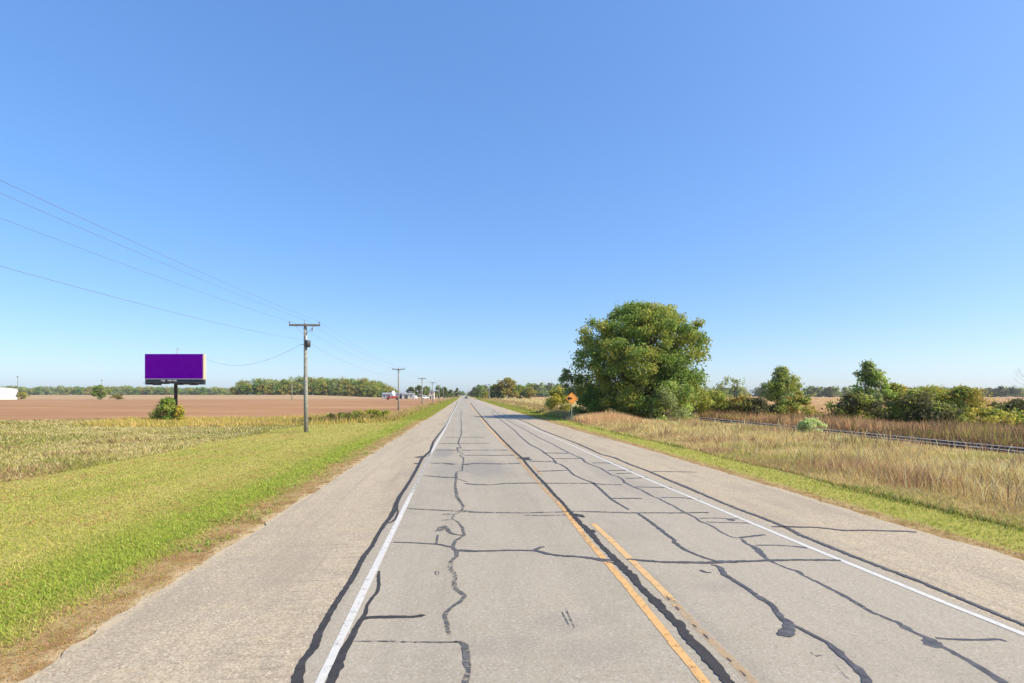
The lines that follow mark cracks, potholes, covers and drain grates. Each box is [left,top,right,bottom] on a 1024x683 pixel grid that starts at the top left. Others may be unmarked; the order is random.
crack [423,443,622,485]
crack [398,542,842,573]
crack [407,508,705,516]
